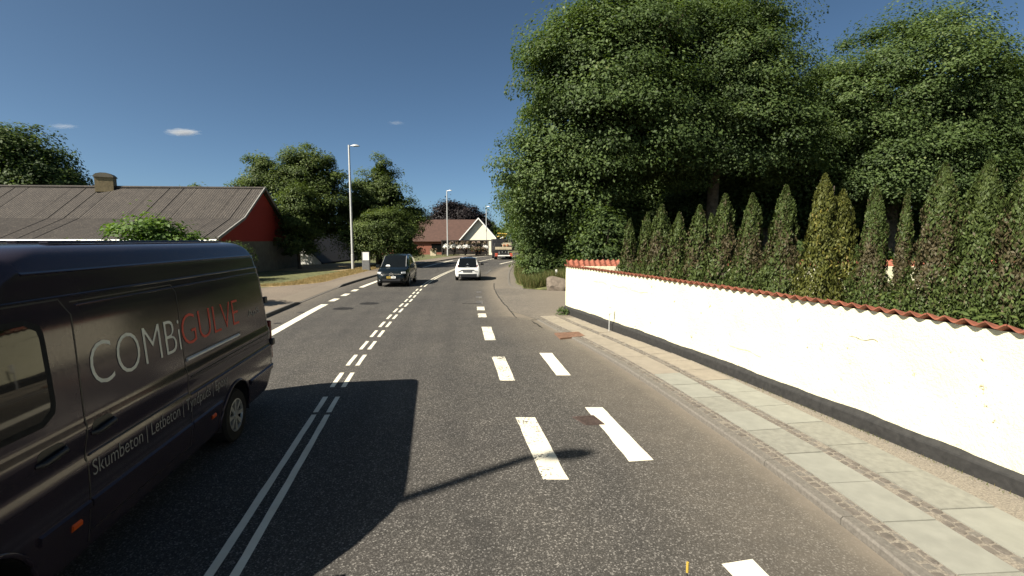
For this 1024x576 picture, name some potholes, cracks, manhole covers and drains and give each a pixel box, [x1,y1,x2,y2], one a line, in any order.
manhole cover [555,332,585,340]
